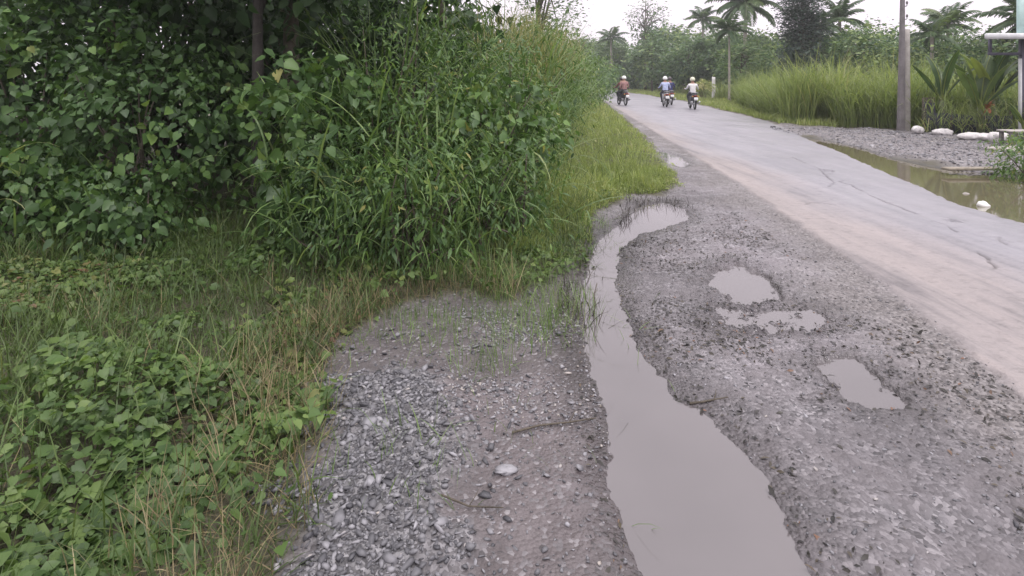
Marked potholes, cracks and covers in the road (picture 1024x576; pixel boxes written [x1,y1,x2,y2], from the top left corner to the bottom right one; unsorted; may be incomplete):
crack [967,234,1018,273]
crack [787,156,967,234]
pothole [686,255,804,313]
pothole [793,341,948,432]
